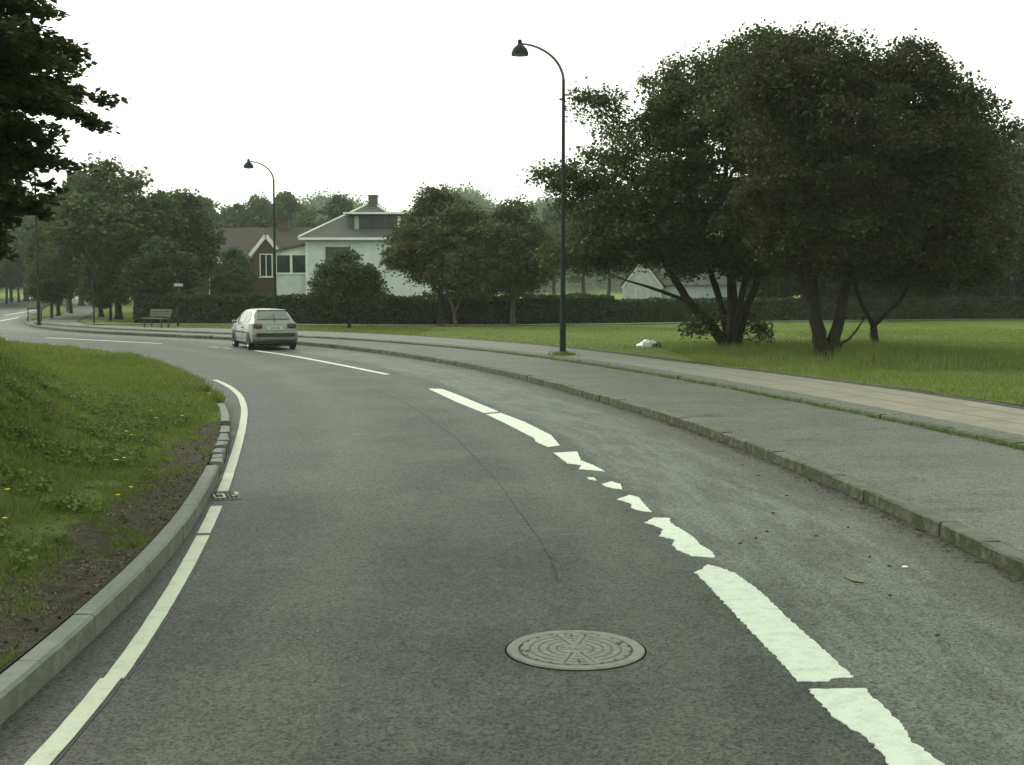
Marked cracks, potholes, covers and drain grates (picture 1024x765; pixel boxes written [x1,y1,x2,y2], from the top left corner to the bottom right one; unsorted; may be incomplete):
crack [356,383,558,581]
manhole cover [505,630,647,671]
